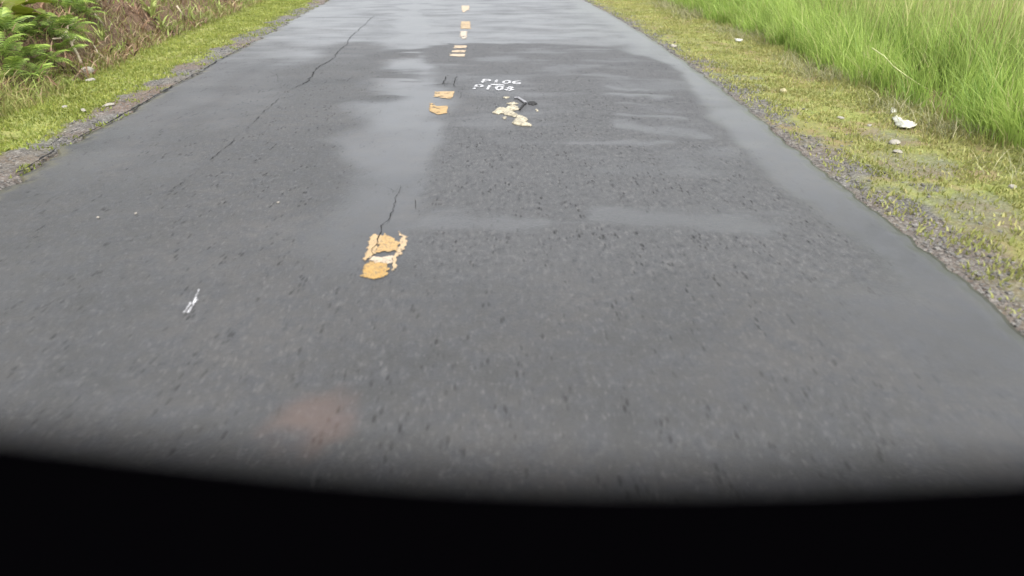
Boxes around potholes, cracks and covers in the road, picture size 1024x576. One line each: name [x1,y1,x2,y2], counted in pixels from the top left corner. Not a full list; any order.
crack [169,16,374,191]
crack [330,186,416,421]
